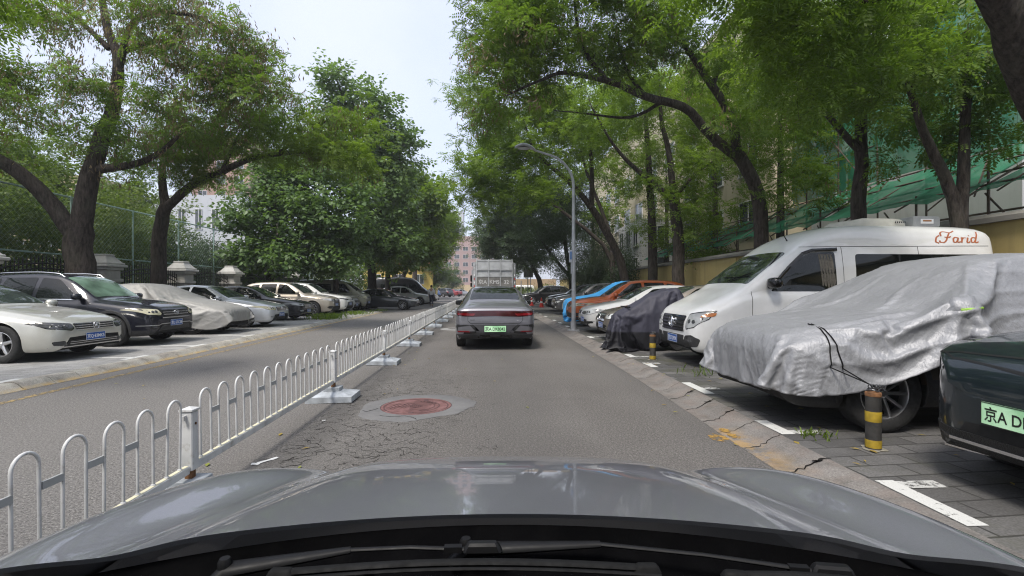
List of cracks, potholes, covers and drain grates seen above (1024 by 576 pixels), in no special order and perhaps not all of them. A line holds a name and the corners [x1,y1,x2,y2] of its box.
manhole cover [358,395,477,423]
crack [283,362,498,471]
crack [787,458,831,472]
